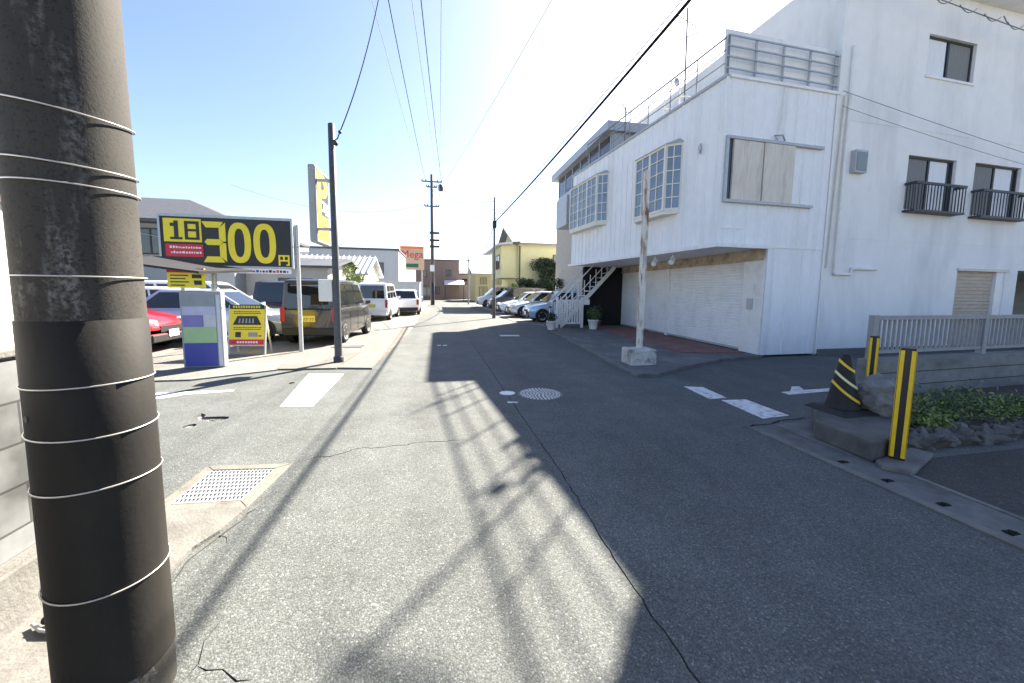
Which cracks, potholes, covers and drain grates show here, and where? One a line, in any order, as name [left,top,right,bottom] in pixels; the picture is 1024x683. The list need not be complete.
crack [172,510,254,583]
crack [304,439,464,461]
crack [182,618,253,682]
manhole cover [518,388,563,400]
